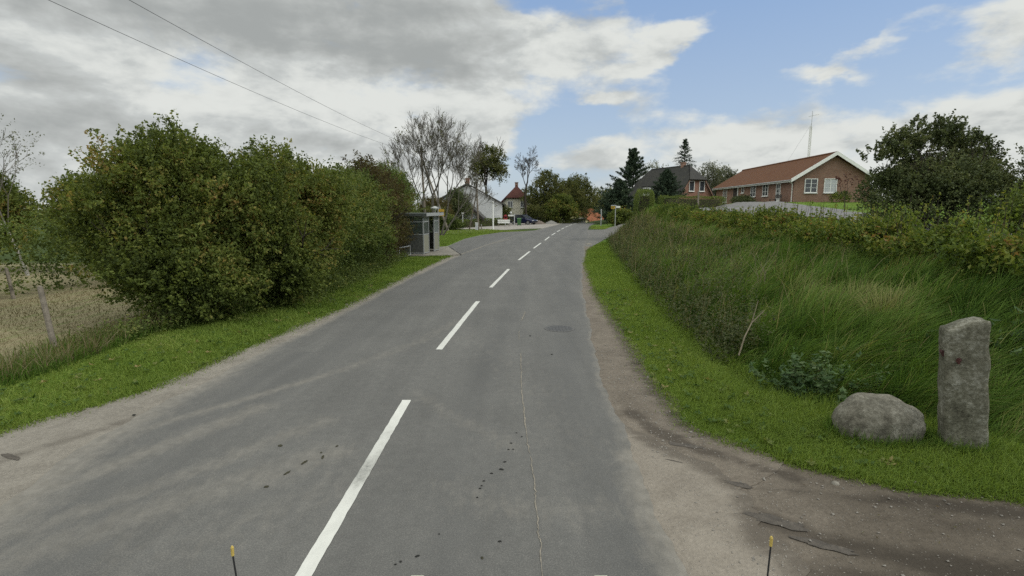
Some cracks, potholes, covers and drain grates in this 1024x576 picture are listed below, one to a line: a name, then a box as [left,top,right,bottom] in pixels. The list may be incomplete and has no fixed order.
crack [520,354,543,576]
